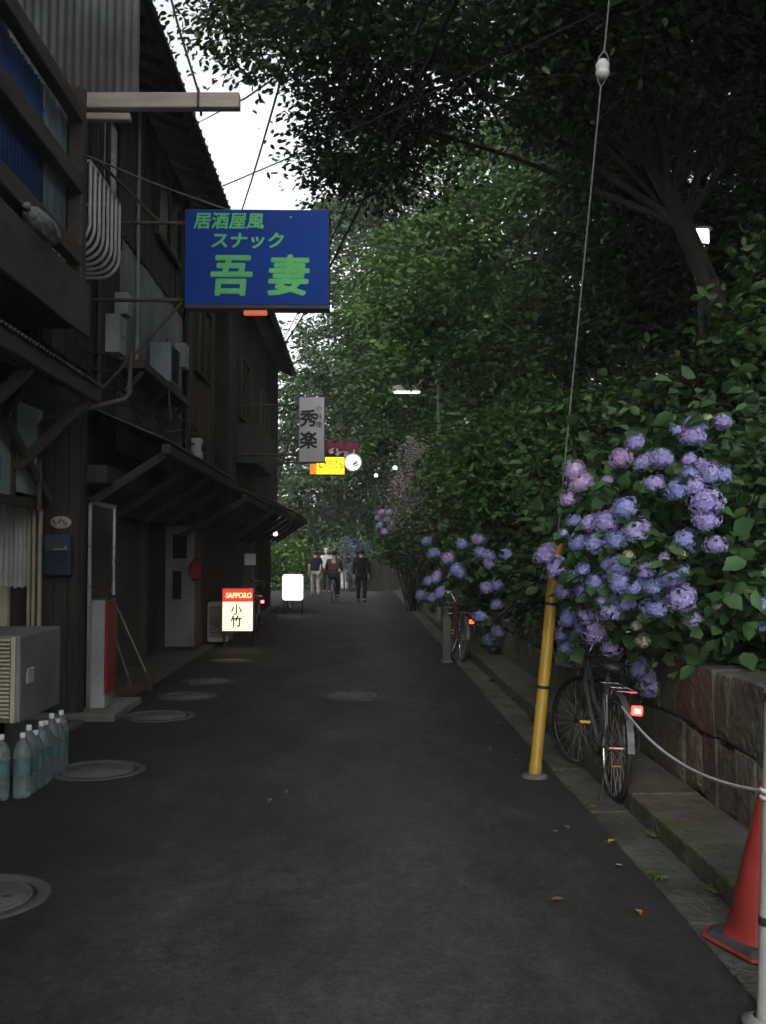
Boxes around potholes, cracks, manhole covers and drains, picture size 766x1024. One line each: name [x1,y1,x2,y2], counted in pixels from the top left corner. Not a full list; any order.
manhole cover [182,677,235,685]
manhole cover [320,690,386,701]
manhole cover [157,692,218,701]
manhole cover [53,760,146,781]
manhole cover [0,873,52,919]
manhole cover [121,710,195,722]
